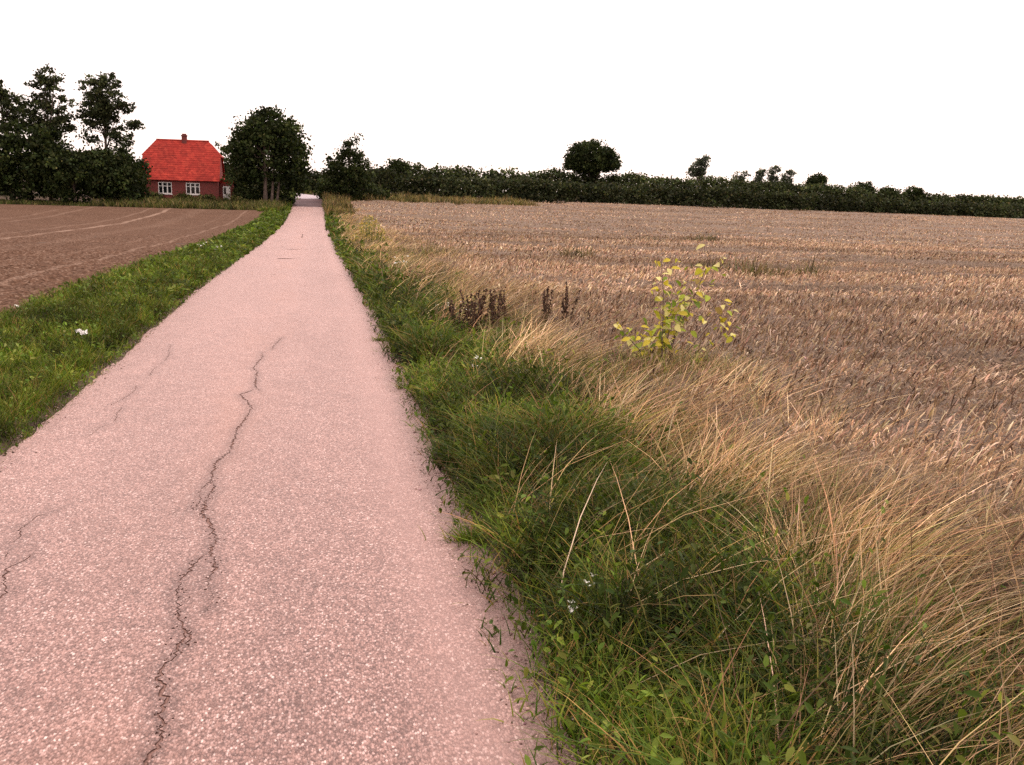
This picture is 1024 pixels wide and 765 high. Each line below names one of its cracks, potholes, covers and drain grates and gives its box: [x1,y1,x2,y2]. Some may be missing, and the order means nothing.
crack [0,513,46,598]
crack [143,338,282,765]
